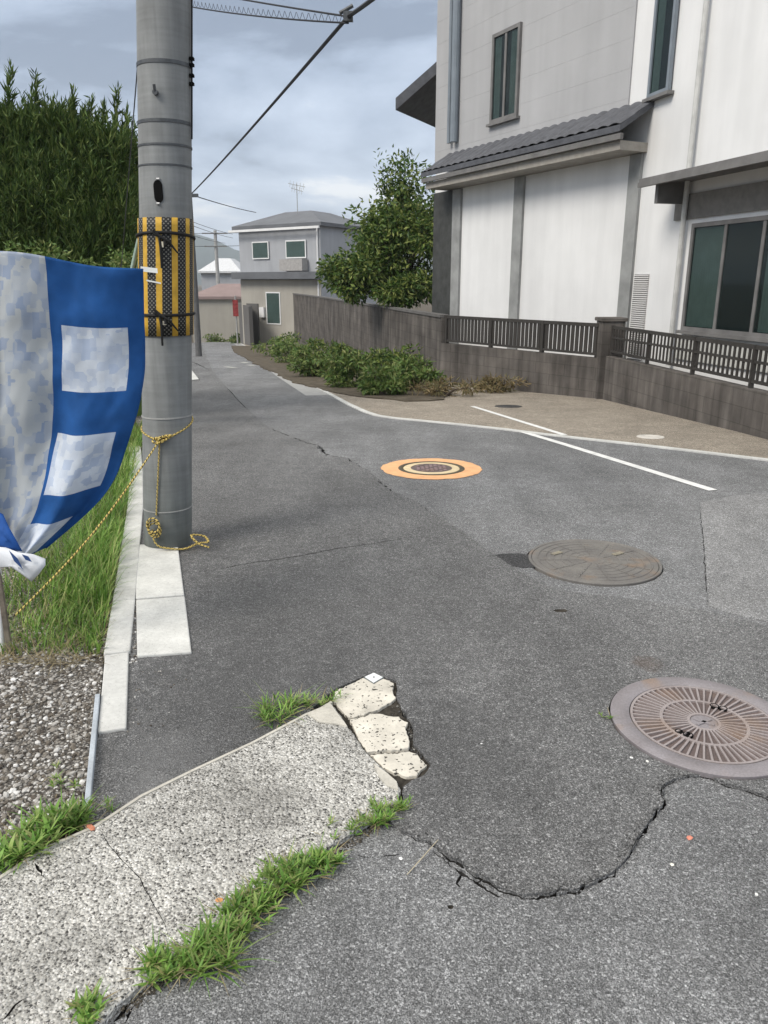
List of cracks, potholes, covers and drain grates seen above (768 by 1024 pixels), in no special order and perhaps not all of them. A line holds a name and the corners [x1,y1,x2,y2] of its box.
crack [436,854,518,906]
crack [103,835,169,938]
manhole cover [528,539,663,587]
manhole cover [610,677,768,780]
manhole cover [381,458,482,479]
